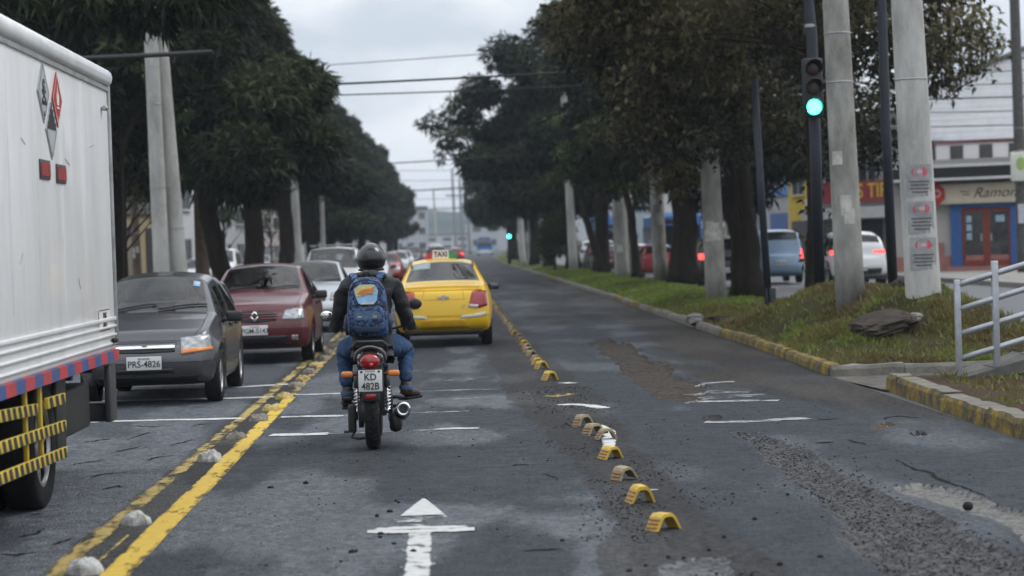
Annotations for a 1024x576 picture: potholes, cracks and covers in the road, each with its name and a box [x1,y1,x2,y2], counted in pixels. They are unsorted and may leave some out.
crack [896,459,991,498]
crack [8,424,200,556]
